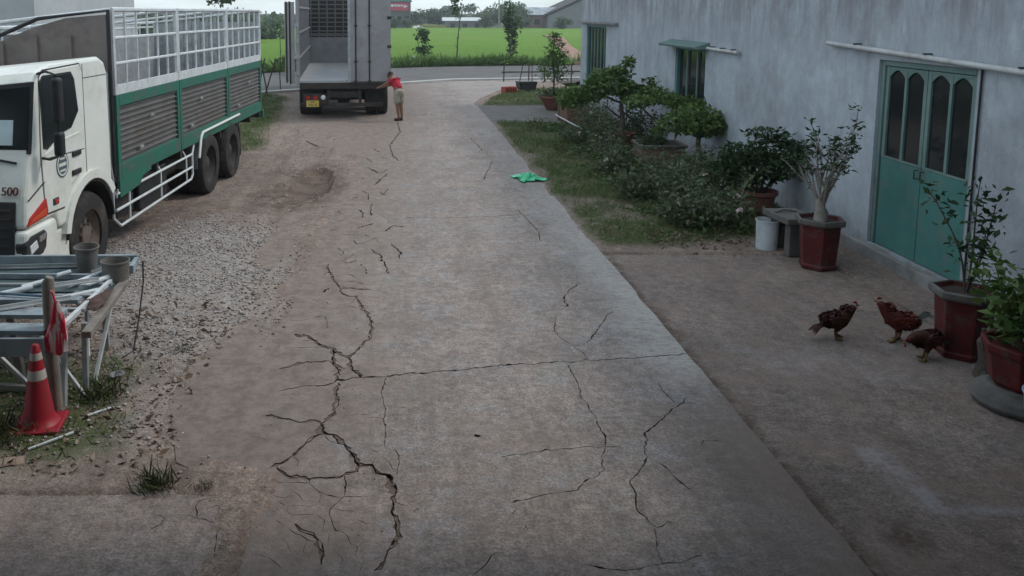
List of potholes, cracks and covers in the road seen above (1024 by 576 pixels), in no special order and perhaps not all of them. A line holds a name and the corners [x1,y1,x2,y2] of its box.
crack [502,284,620,528]
crack [584,383,701,571]
pothole [285,167,337,202]
crack [248,114,421,573]
